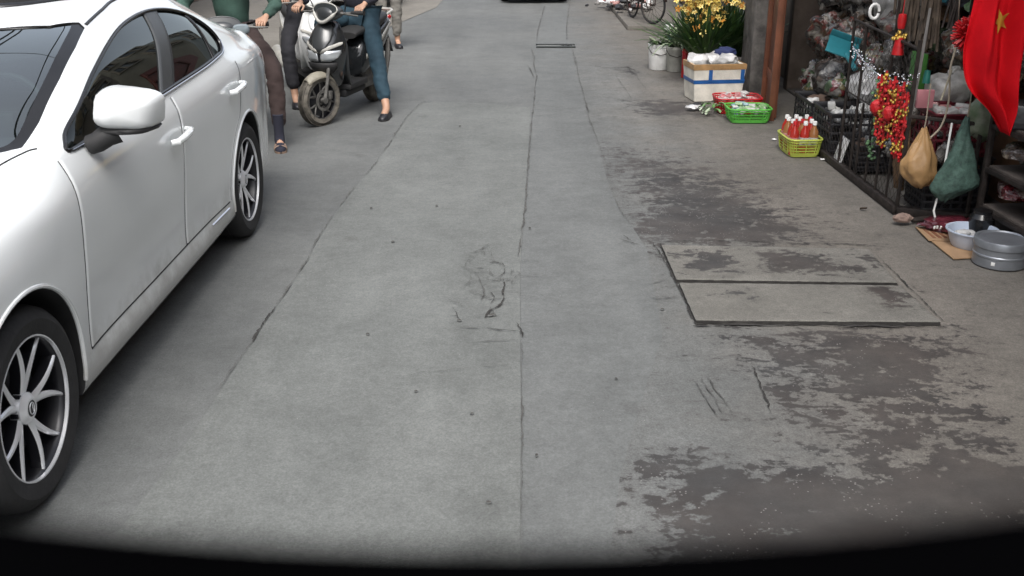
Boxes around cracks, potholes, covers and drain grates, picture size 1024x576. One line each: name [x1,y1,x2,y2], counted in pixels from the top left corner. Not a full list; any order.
manhole cover [660,245,898,286]
manhole cover [678,283,941,326]
crack [451,243,556,343]
